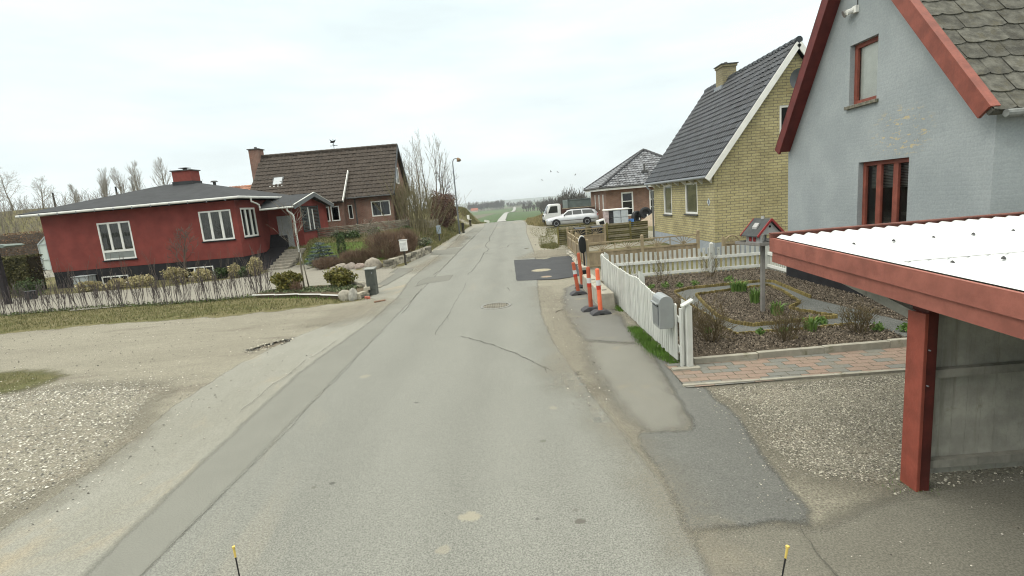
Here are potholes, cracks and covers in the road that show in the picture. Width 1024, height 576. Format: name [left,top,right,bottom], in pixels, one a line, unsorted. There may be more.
pothole [245,337,295,353]
